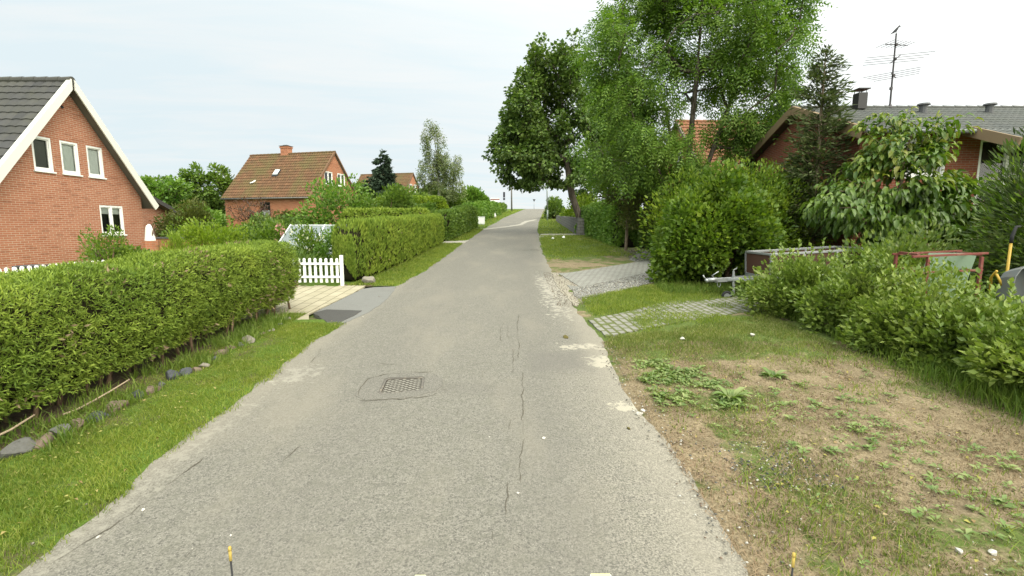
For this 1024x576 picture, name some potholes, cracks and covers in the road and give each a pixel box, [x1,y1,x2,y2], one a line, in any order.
crack [492,315,525,534]
